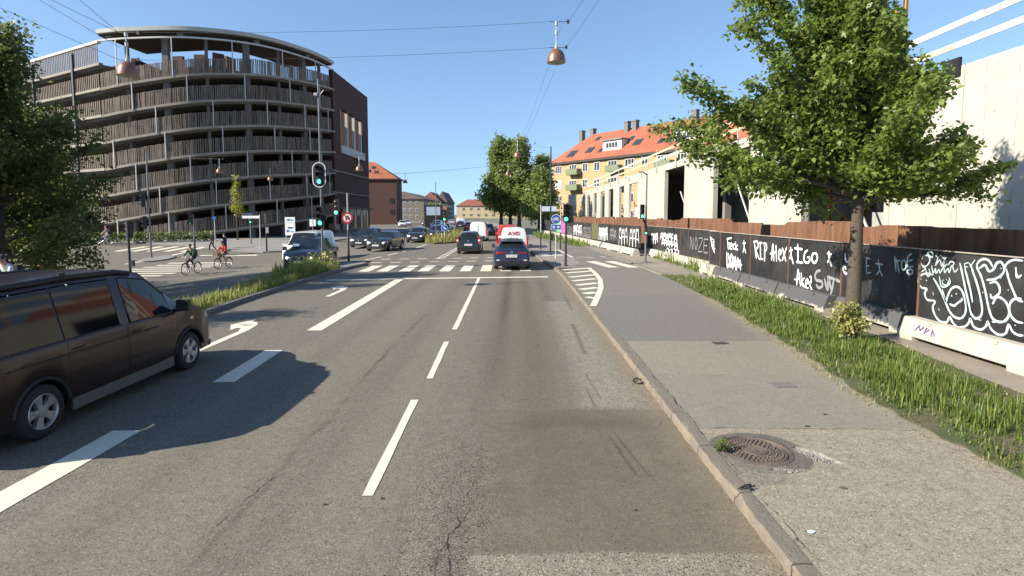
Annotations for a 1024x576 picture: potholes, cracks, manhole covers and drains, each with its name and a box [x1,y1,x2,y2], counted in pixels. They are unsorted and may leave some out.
manhole cover [717,435,795,467]
crack [434,479,476,576]
